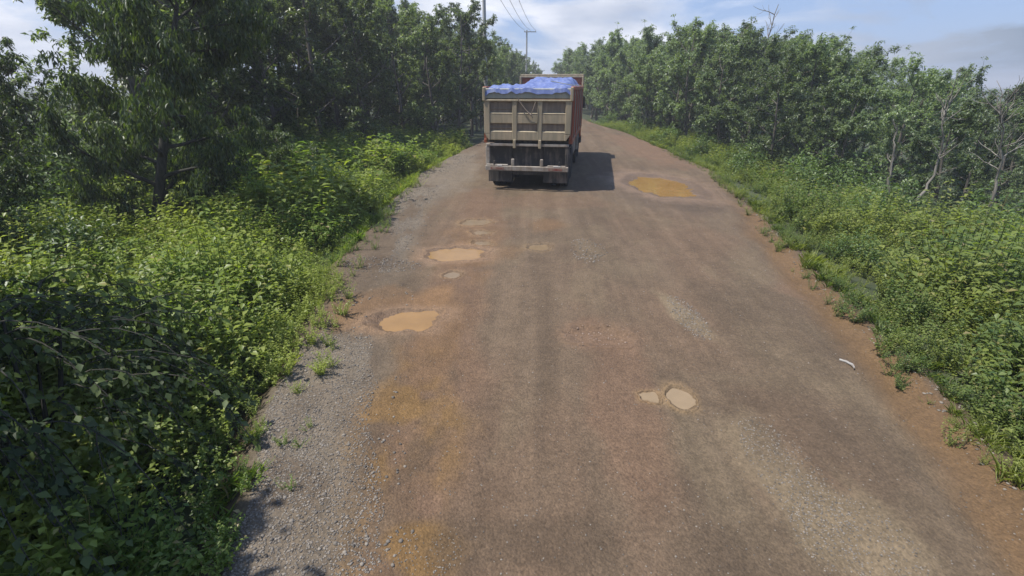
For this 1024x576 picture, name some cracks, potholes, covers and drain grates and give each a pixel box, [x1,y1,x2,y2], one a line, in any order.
pothole [417,244,494,264]
pothole [635,390,663,405]
pothole [457,218,495,226]
pothole [613,171,725,203]
pothole [440,270,464,279]
pothole [356,307,449,335]
pothole [524,243,554,253]
pothole [662,384,700,414]
